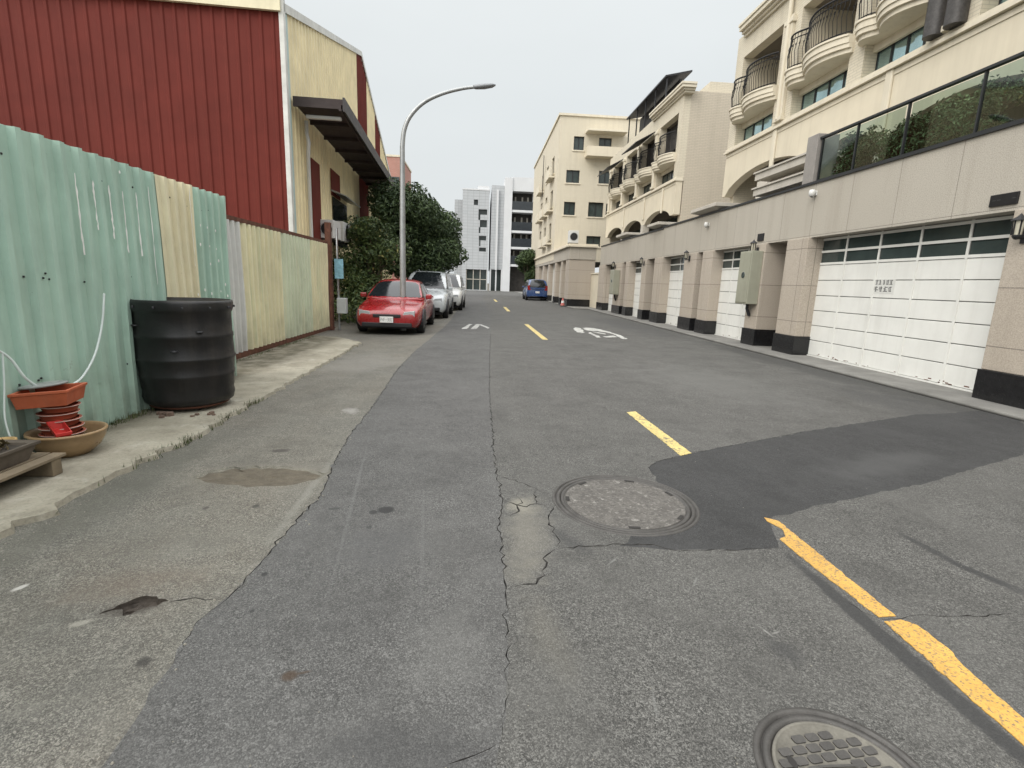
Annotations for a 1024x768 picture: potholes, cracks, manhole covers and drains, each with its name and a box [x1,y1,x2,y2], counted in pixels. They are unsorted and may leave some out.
crack [503,477,775,588]
pothole [100,595,168,616]
manhole cover [552,475,700,537]
crack [449,745,495,764]
crack [847,602,1011,620]
manhole cover [753,707,922,768]
